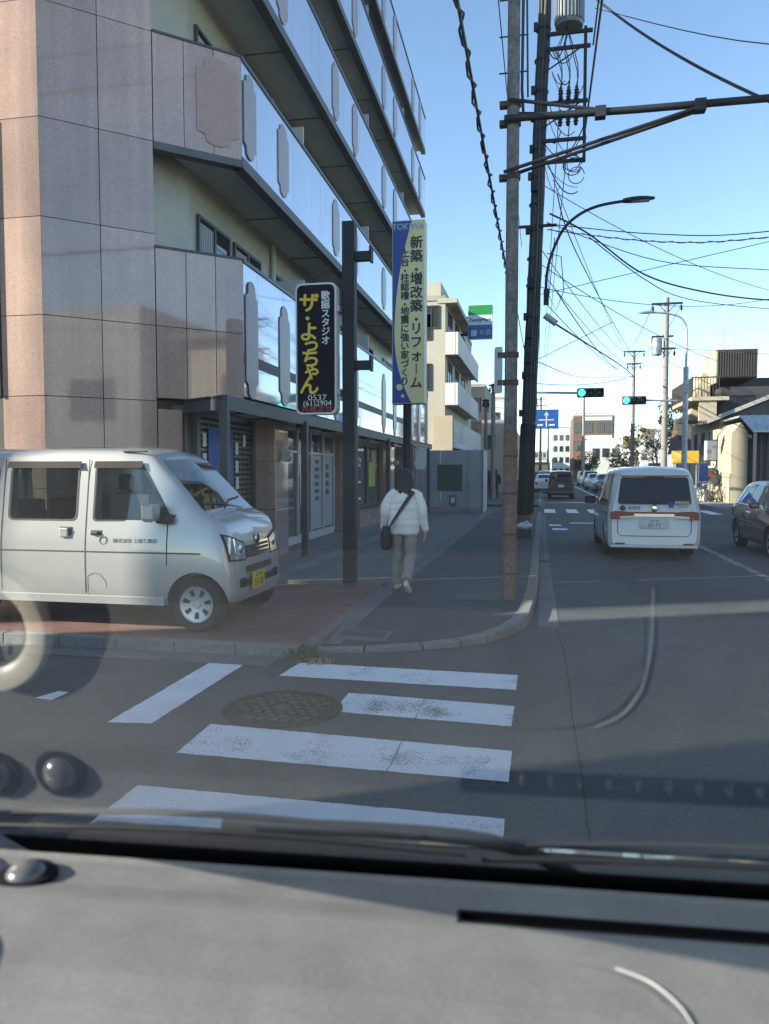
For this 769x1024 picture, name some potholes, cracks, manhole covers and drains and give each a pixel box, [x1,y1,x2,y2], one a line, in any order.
crack [556,628,593,851]
crack [372,696,426,801]
manhole cover [221,691,343,729]
utility cover [331,629,395,642]
